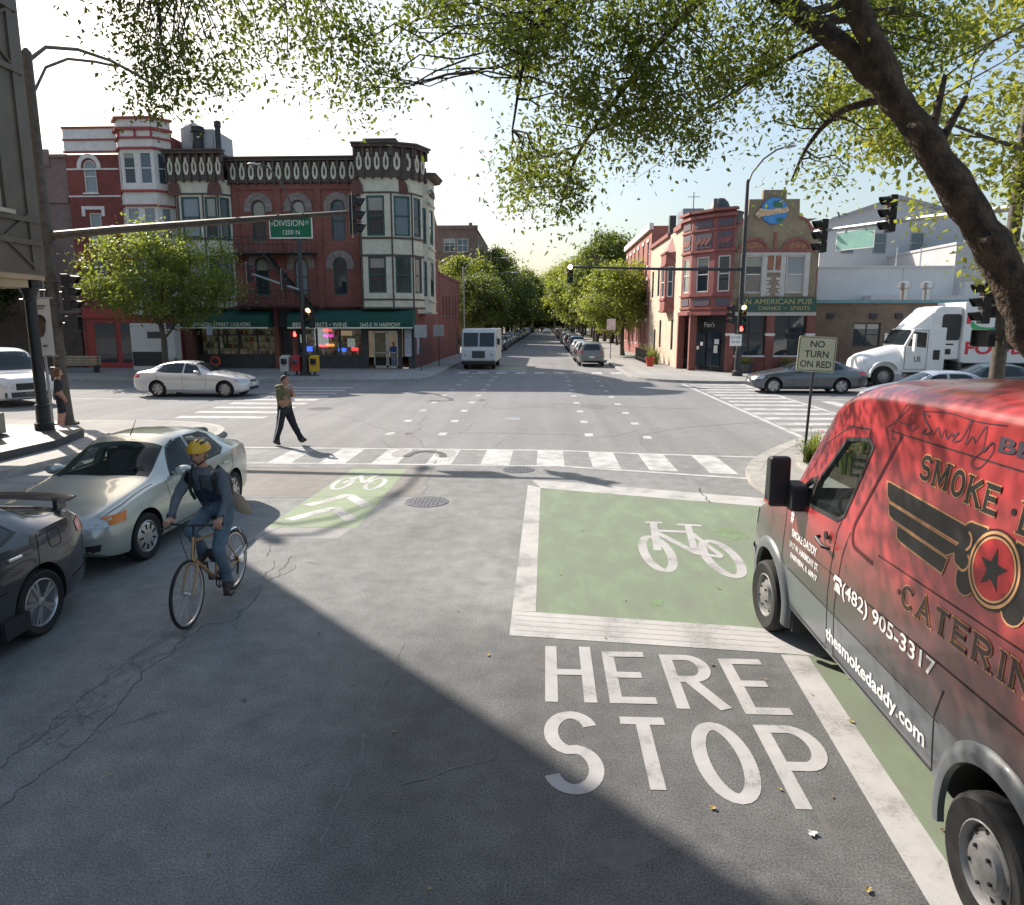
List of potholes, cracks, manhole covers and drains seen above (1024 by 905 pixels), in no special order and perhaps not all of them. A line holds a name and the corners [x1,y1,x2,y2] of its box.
manhole cover [405,496,449,507]
crack [0,527,315,809]
crack [399,758,492,785]
